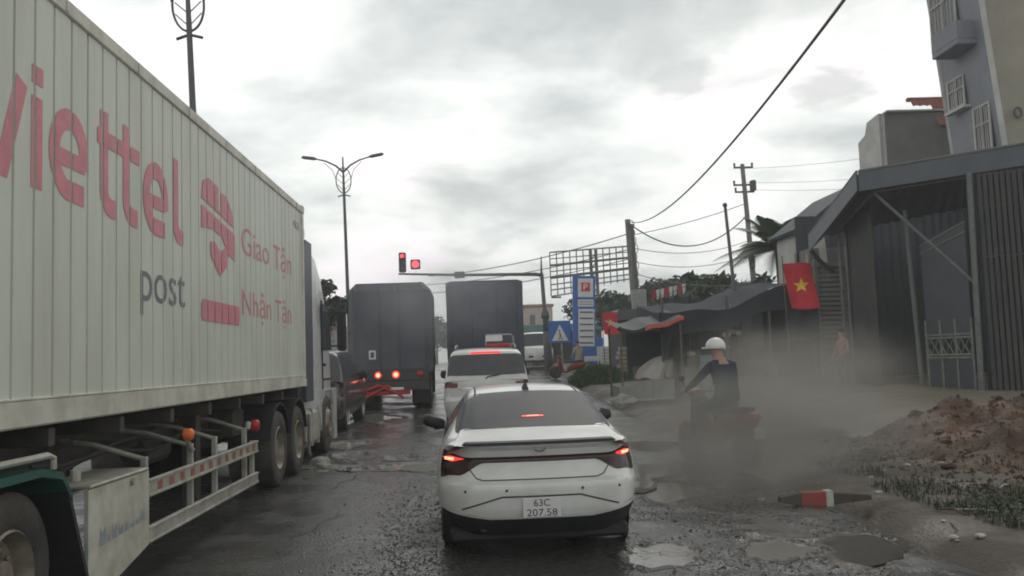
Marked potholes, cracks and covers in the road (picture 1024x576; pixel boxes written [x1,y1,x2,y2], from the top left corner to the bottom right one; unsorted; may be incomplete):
pothole [732,536,824,564]
pothole [608,539,710,573]
pothole [301,460,365,473]
pothole [329,440,373,450]
pothole [634,479,719,505]
pothole [328,451,380,461]
